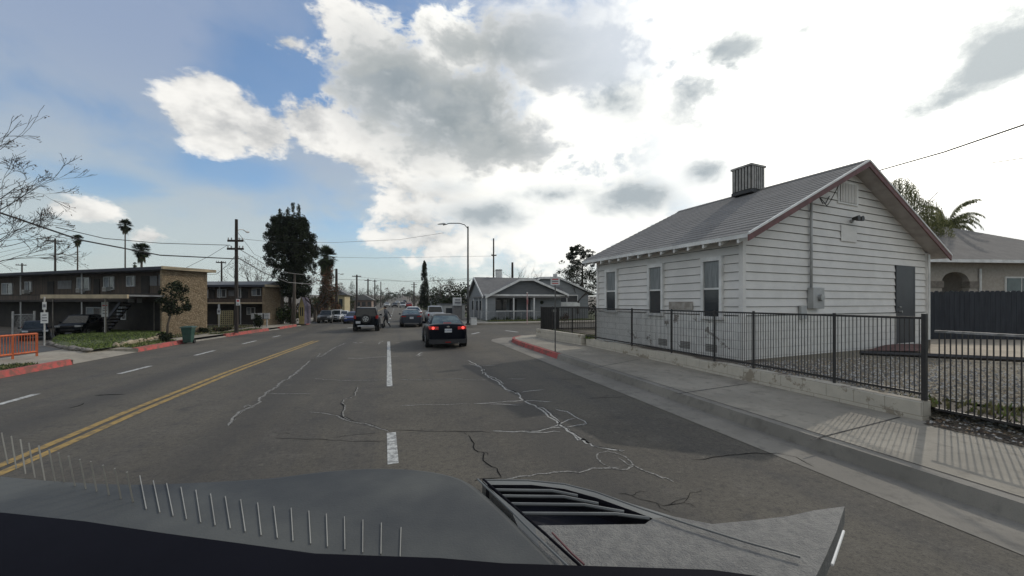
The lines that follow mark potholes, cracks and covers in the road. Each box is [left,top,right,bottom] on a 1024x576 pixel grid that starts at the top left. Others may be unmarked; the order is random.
crack [228,341,700,511]
crack [693,453,814,467]
